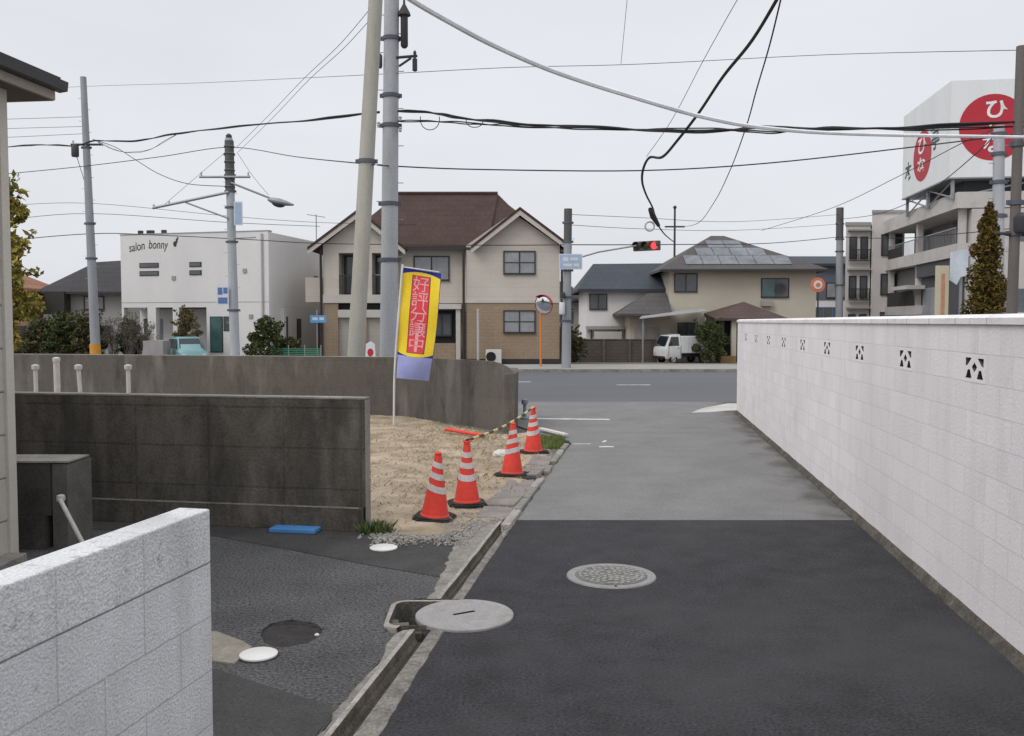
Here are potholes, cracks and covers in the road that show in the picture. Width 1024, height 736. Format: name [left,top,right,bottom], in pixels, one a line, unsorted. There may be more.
manhole cover [567,563,656,589]
manhole cover [415,599,514,633]
